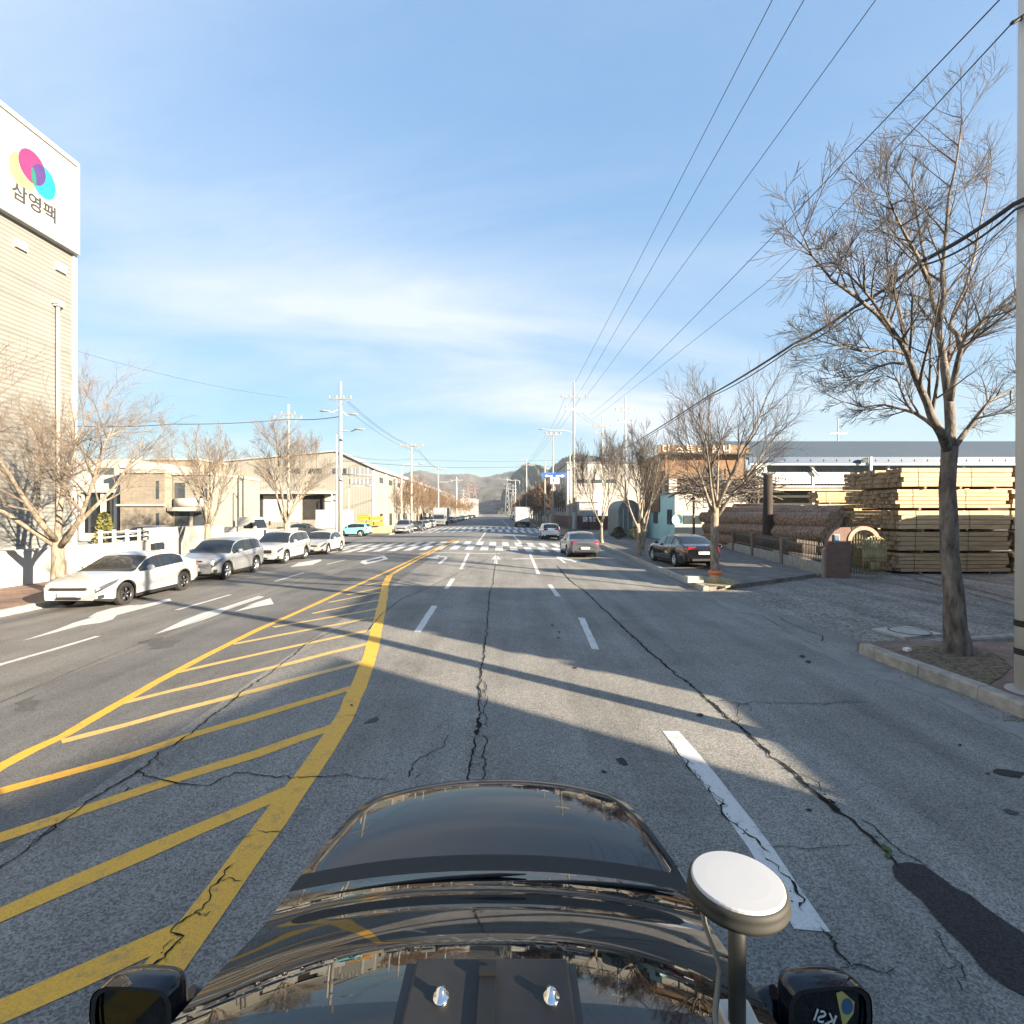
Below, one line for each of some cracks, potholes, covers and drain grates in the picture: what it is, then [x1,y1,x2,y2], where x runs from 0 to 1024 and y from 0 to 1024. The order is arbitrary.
crack [153,865,242,964]
crack [670,741,852,912]
crack [407,556,497,780]
crack [861,819,929,868]
crack [720,699,854,723]
pothole [993,769,1024,778]
manhole cover [872,626,943,639]
crack [138,758,384,786]
